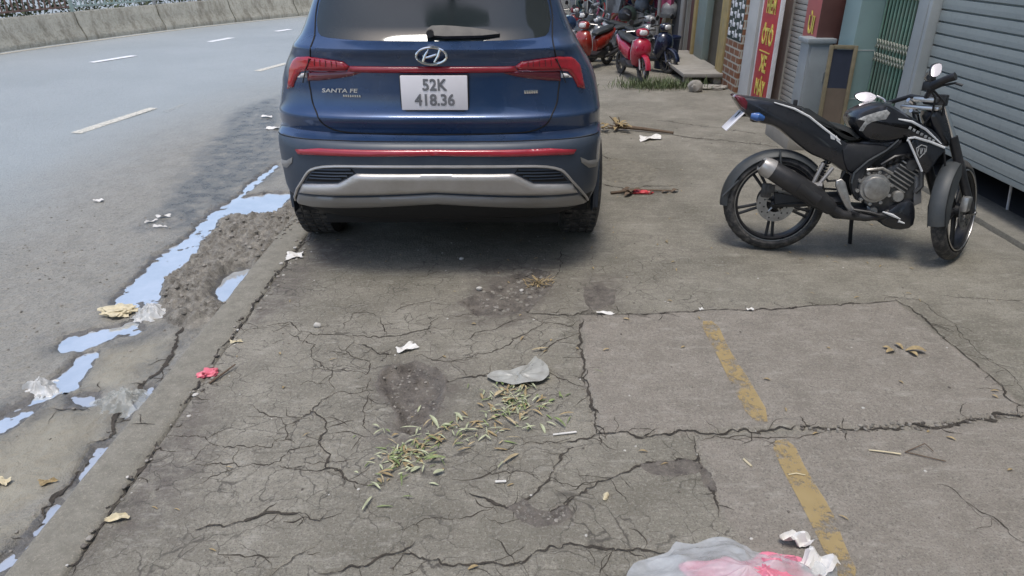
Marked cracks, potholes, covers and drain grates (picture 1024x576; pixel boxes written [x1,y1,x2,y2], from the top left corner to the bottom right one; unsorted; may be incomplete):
pothole [107,164,291,308]
crack [218,547,316,576]
pothole [374,360,449,436]
crack [195,503,340,530]
pothole [638,458,703,477]
crack [168,301,606,498]
crack [324,294,1024,576]
